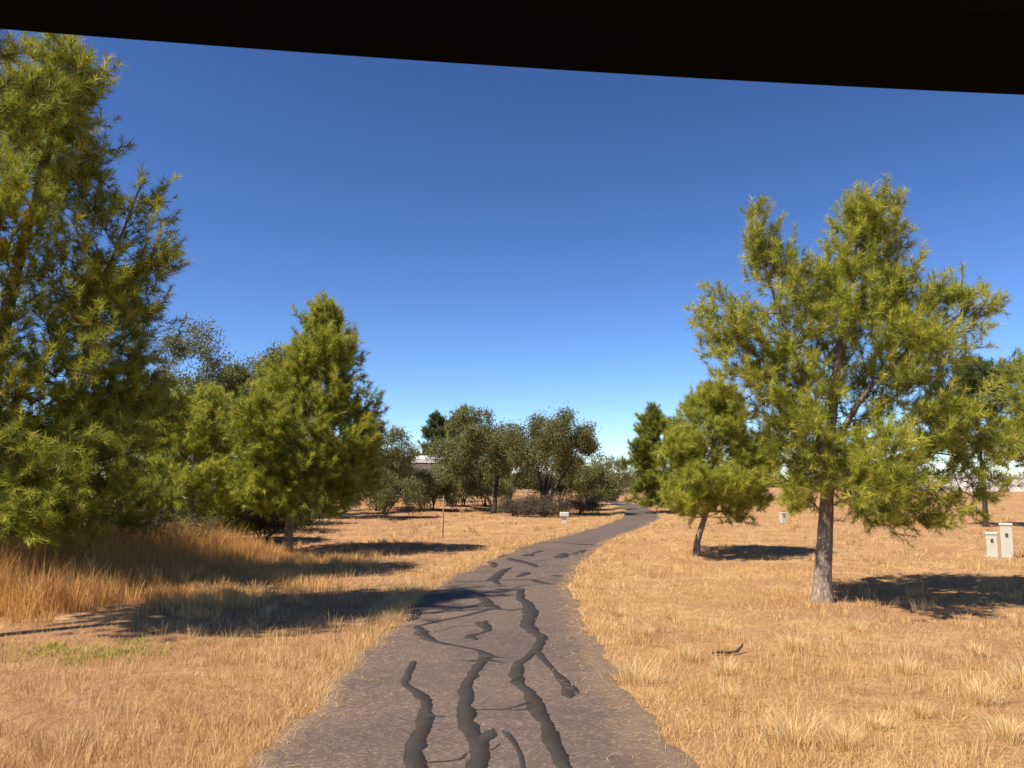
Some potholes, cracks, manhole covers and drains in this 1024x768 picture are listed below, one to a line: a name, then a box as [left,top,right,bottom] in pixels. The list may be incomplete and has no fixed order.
crack [391,567,579,768]
crack [539,542,595,561]
